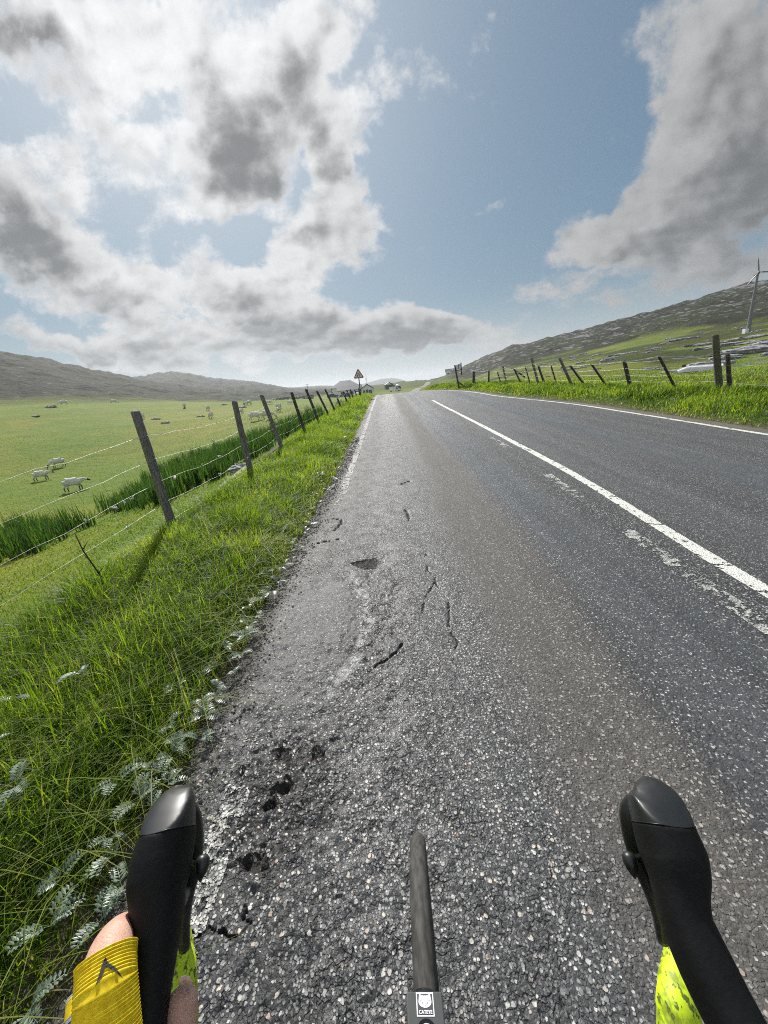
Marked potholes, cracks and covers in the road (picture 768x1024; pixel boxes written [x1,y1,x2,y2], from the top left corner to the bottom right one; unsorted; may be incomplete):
pothole [234,852,270,875]
pothole [309,744,328,765]
pothole [270,746,293,769]
pothole [349,557,378,570]
pothole [258,774,294,813]
crack [374,643,403,668]
crack [421,553,459,649]
